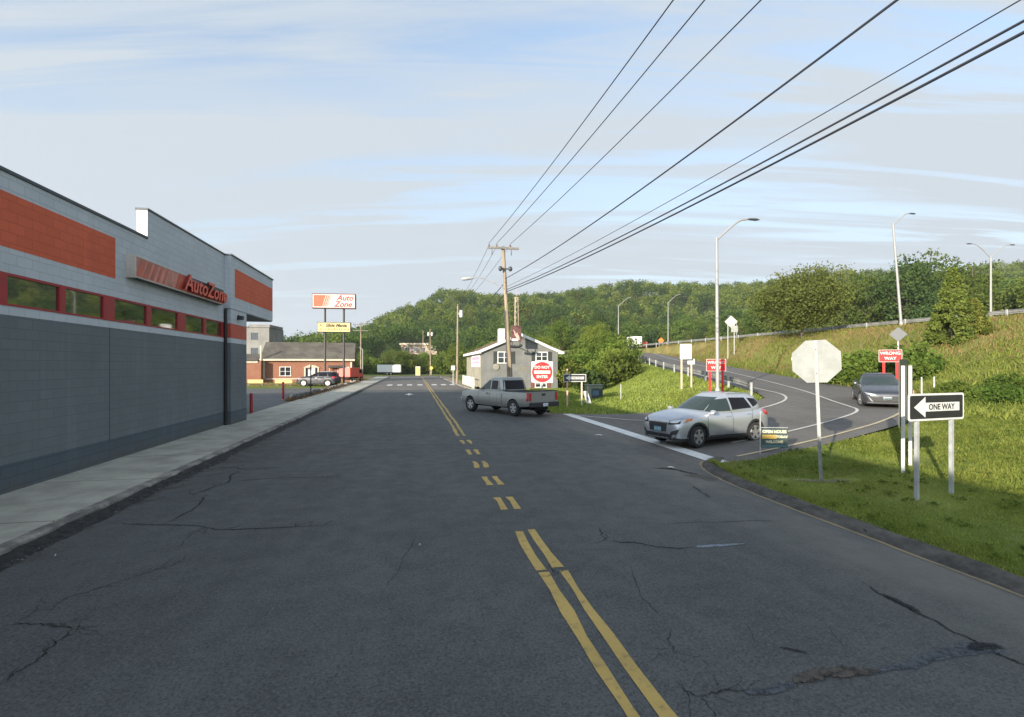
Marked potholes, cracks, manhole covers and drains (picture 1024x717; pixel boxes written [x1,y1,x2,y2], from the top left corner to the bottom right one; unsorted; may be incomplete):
crack [9,559,184,676]
crack [597,532,681,549]
crack [123,467,338,535]
